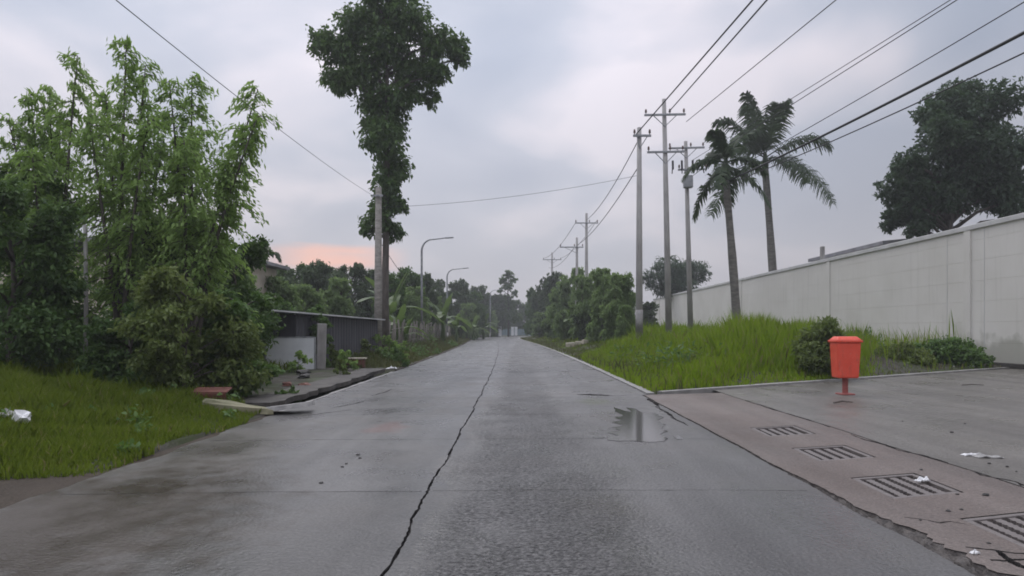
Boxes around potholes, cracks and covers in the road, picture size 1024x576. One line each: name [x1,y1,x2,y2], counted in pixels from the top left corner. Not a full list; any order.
crack [304,343,499,576]
crack [965,546,1024,569]
crack [647,399,689,426]
drain grate [958,513,1024,576]
